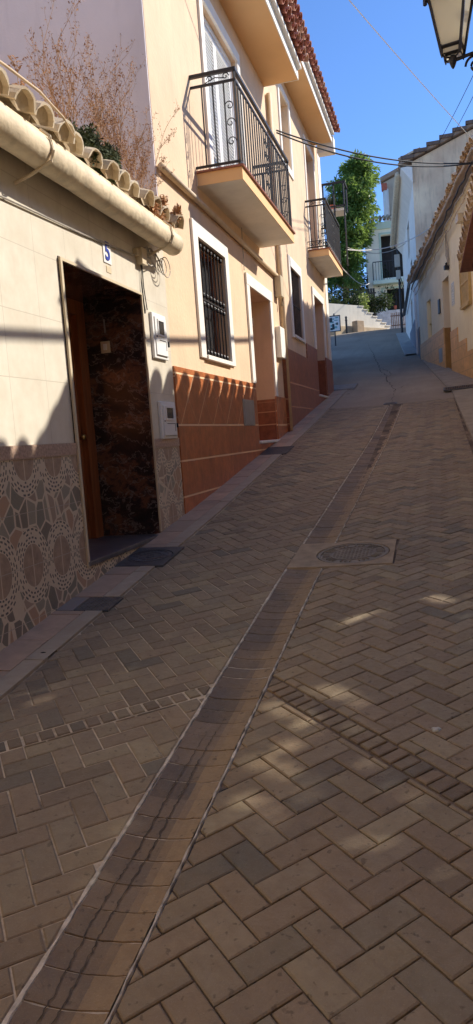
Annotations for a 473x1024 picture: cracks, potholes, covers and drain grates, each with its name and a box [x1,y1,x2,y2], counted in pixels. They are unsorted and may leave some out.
manhole cover [287,539,397,570]
